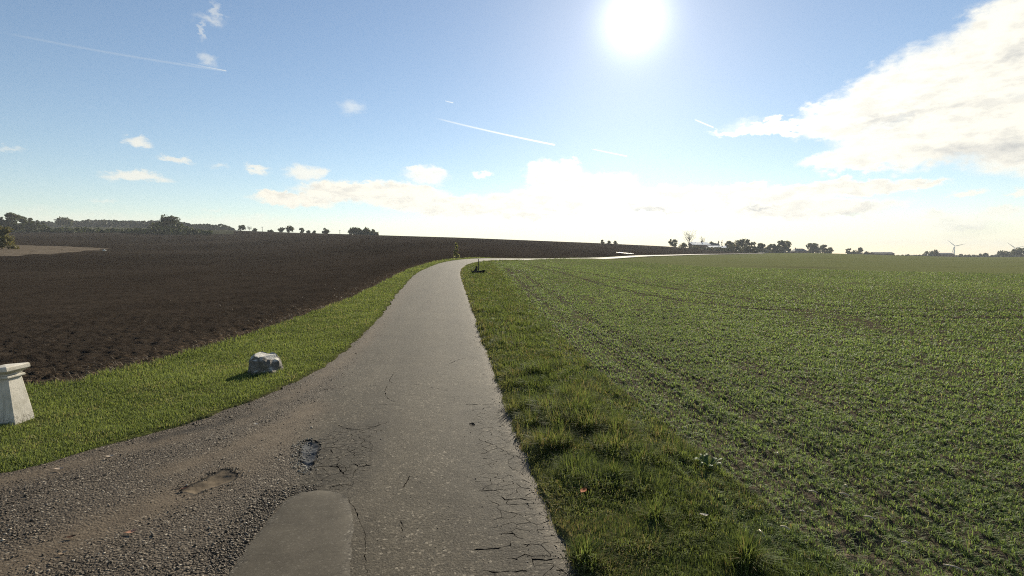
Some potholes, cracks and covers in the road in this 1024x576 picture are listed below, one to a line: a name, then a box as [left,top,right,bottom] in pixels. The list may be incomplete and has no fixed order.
pothole [289,436,327,476]
pothole [173,465,250,499]
crack [472,407,567,576]
crack [300,422,387,571]
